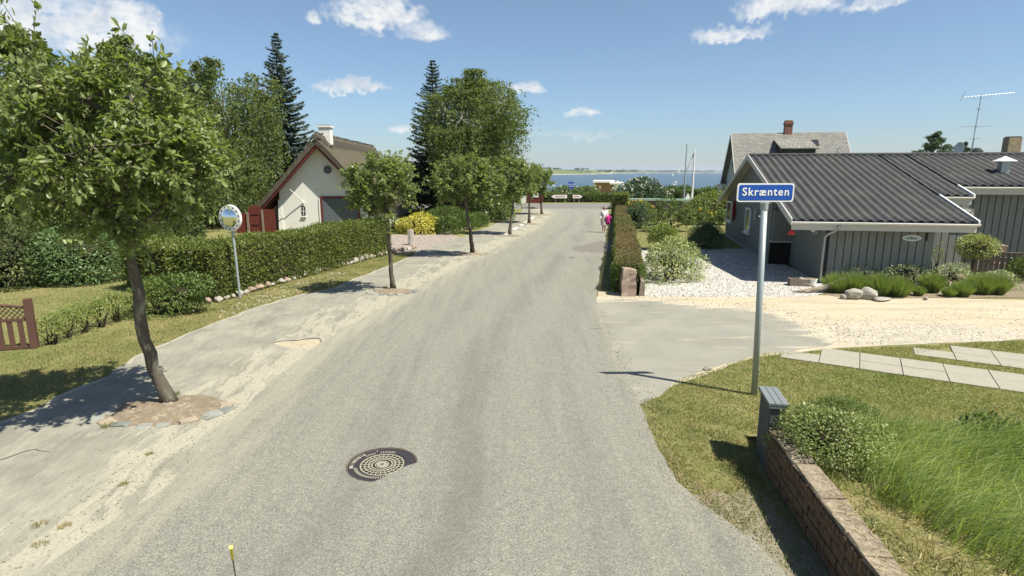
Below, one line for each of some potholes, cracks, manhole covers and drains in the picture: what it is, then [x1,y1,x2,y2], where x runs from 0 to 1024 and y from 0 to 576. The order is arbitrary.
manhole cover [346,448,417,482]
